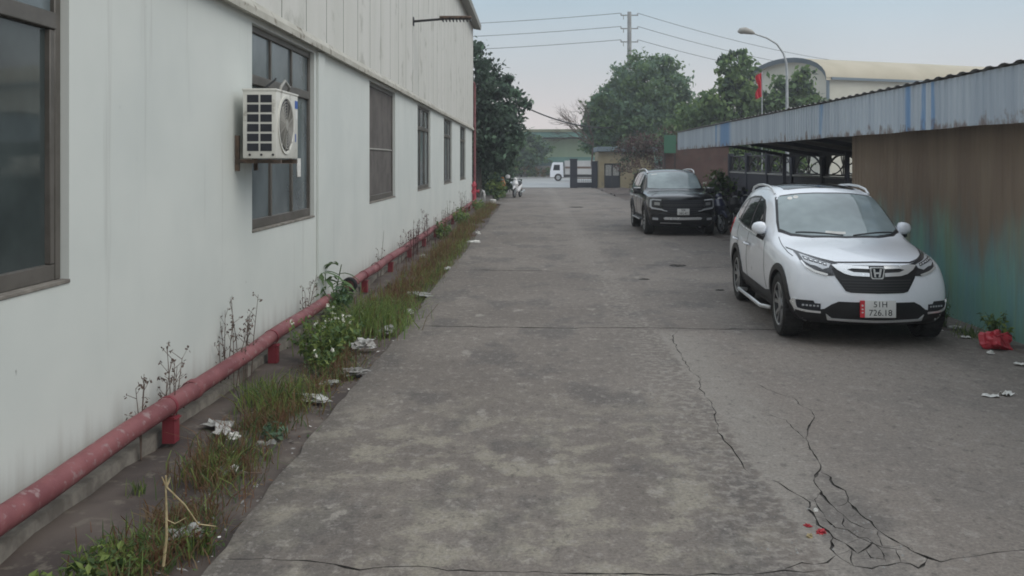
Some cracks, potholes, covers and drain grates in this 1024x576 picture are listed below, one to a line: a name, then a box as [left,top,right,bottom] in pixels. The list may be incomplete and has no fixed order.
crack [222,385,1021,576]
crack [672,330,748,472]
